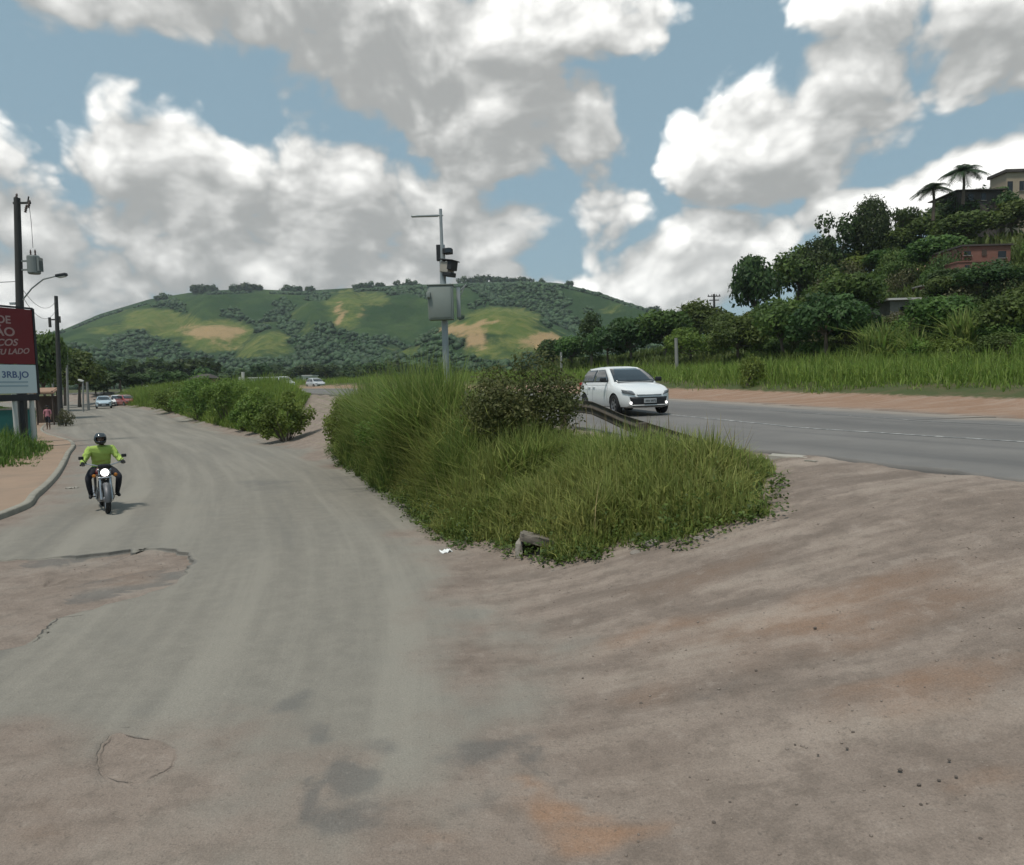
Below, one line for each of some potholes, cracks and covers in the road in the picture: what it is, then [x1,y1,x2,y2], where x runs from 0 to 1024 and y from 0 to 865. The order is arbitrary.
pothole [0,547,202,654]
